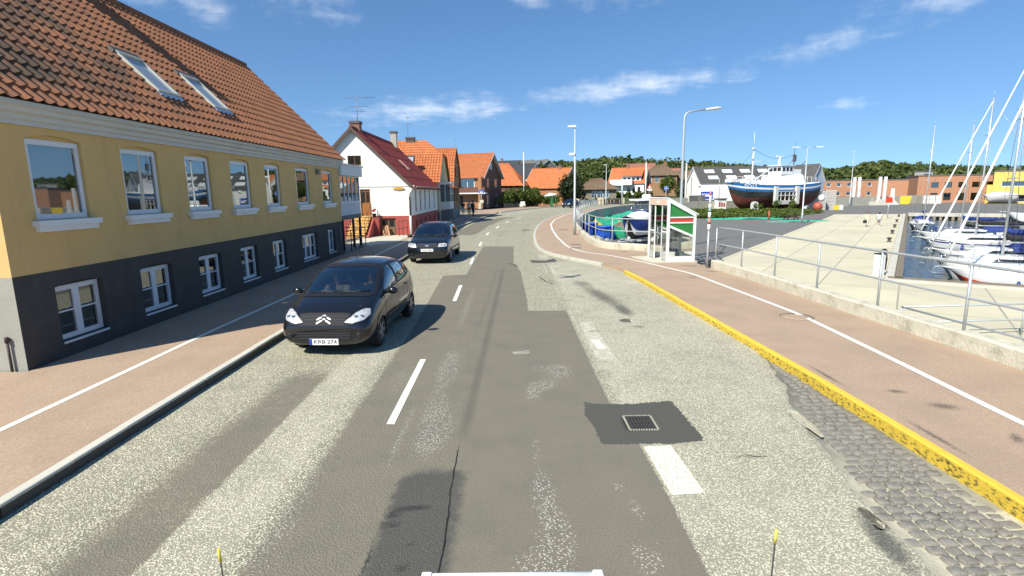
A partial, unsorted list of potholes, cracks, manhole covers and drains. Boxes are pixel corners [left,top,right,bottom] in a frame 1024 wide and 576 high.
drain grate [622,415,659,431]
crack [438,448,459,573]
pothole [857,507,890,530]
pothole [788,410,824,437]
